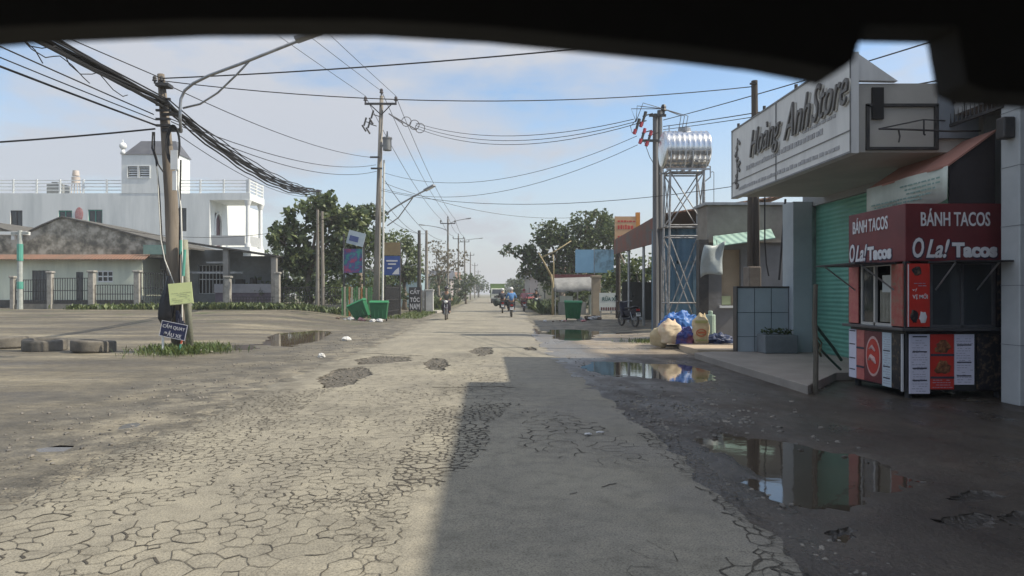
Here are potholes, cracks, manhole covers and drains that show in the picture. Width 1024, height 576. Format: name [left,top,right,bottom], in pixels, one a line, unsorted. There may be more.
pothole [355,356,412,365]
pothole [423,358,450,371]
crack [0,351,819,576]
pothole [316,366,373,388]
pothole [929,512,997,529]
pothole [468,347,494,356]
pothole [824,527,858,542]
